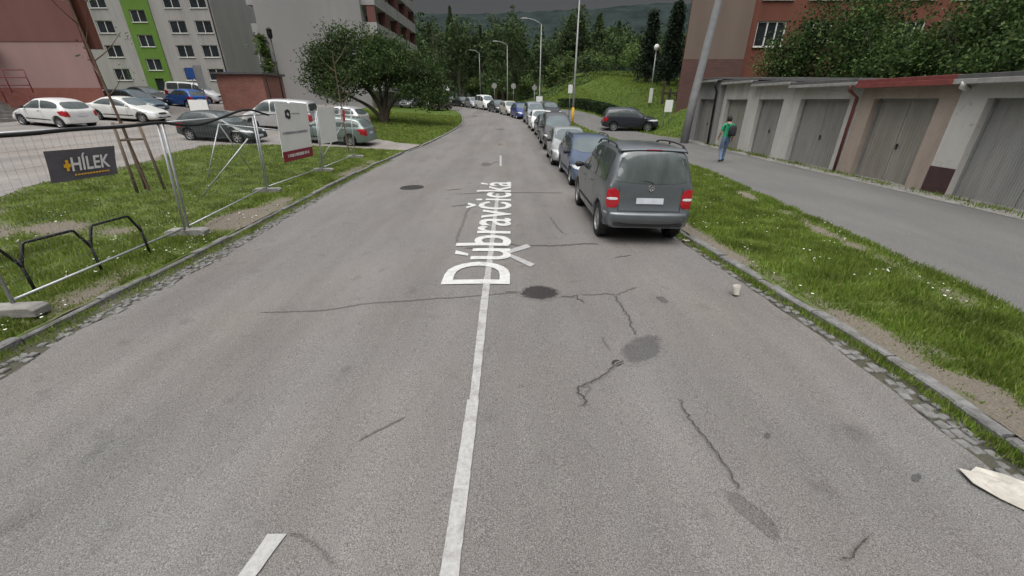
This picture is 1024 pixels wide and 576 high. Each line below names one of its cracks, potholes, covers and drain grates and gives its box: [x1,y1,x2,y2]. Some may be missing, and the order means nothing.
crack [677,398,741,491]
crack [510,216,599,246]
crack [359,416,404,440]
crack [560,287,638,405]
crack [841,534,871,561]
crack [286,530,338,568]
crack [260,291,523,313]
